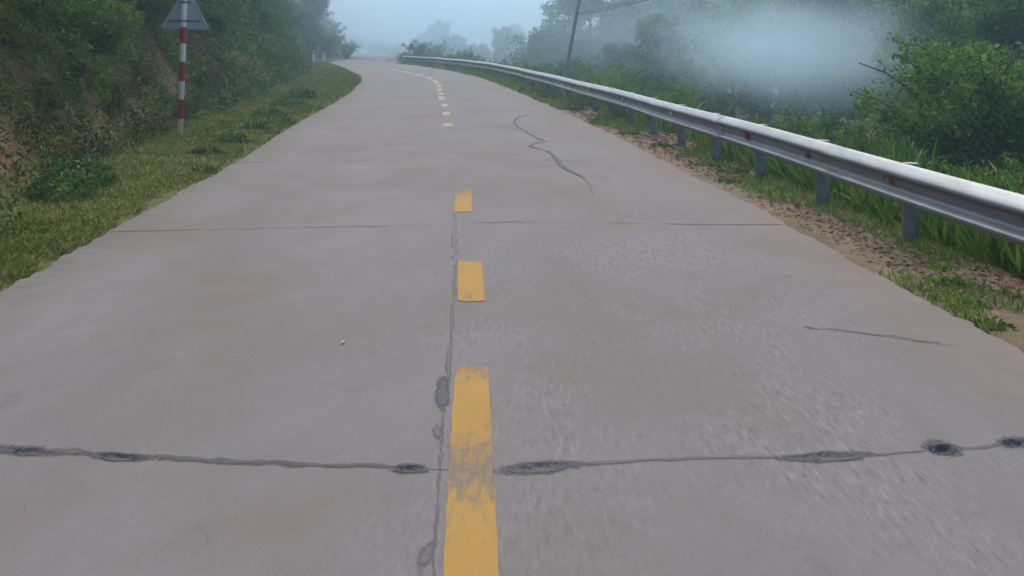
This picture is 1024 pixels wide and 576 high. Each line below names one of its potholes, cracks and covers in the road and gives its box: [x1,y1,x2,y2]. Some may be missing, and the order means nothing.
crack [803,326,956,346]
pothole [922,439,963,456]
